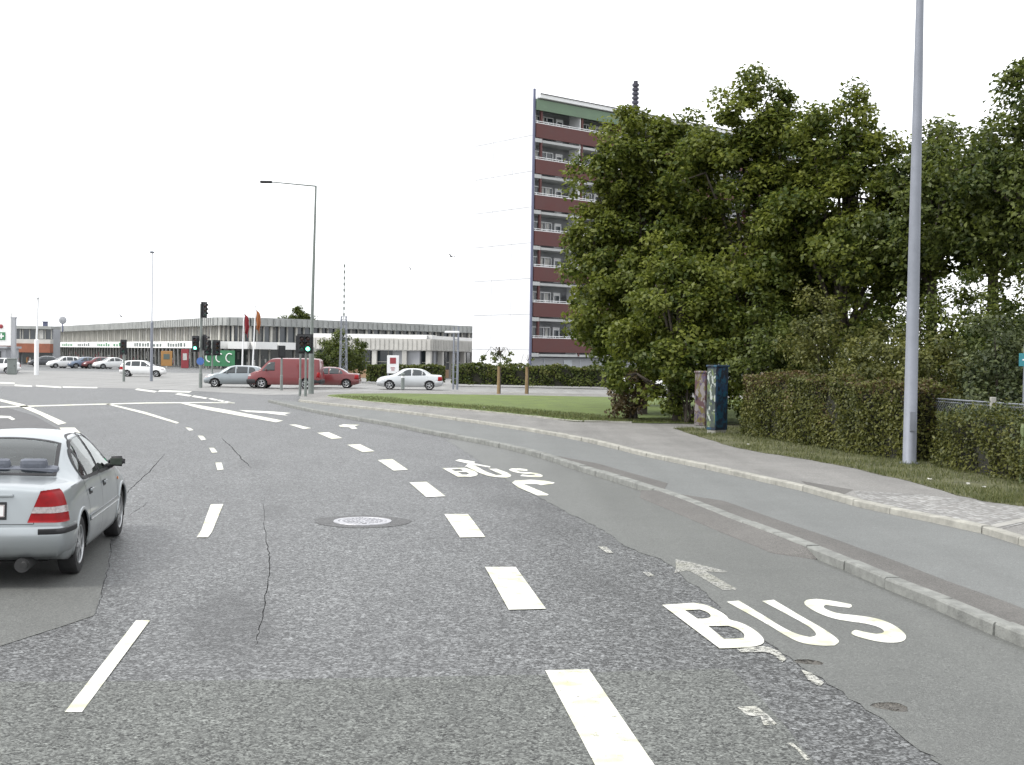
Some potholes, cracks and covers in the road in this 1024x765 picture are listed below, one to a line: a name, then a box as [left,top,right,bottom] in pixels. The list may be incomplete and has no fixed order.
crack [256,496,270,649]
manhole cover [333,517,392,525]
